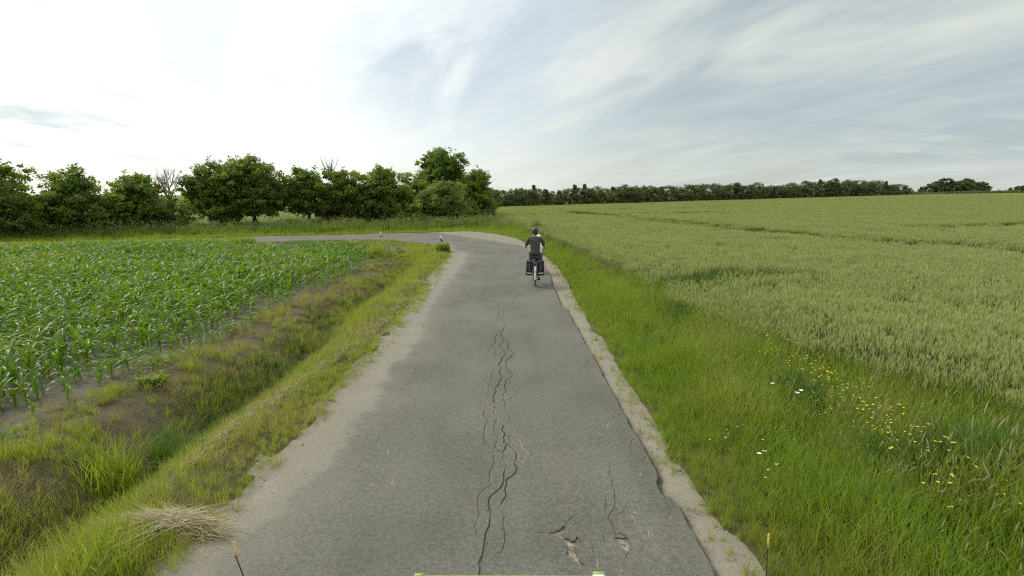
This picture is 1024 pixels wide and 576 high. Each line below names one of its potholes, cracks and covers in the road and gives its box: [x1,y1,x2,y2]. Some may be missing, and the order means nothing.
crack [474,288,677,576]
pothole [550,526,584,566]
